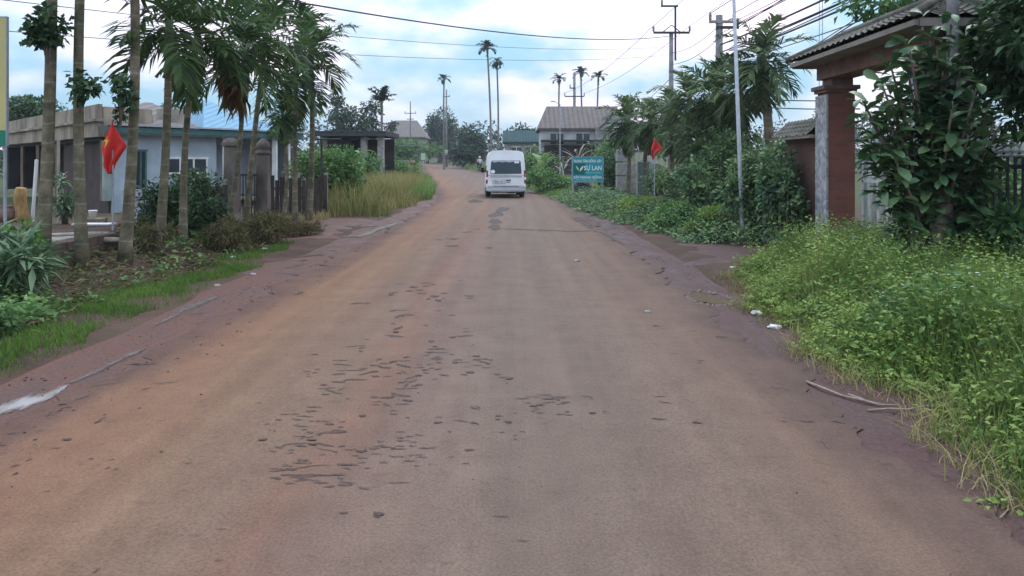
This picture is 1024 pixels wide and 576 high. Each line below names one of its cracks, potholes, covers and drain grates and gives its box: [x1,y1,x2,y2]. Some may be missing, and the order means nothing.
pothole [685,289,737,307]
